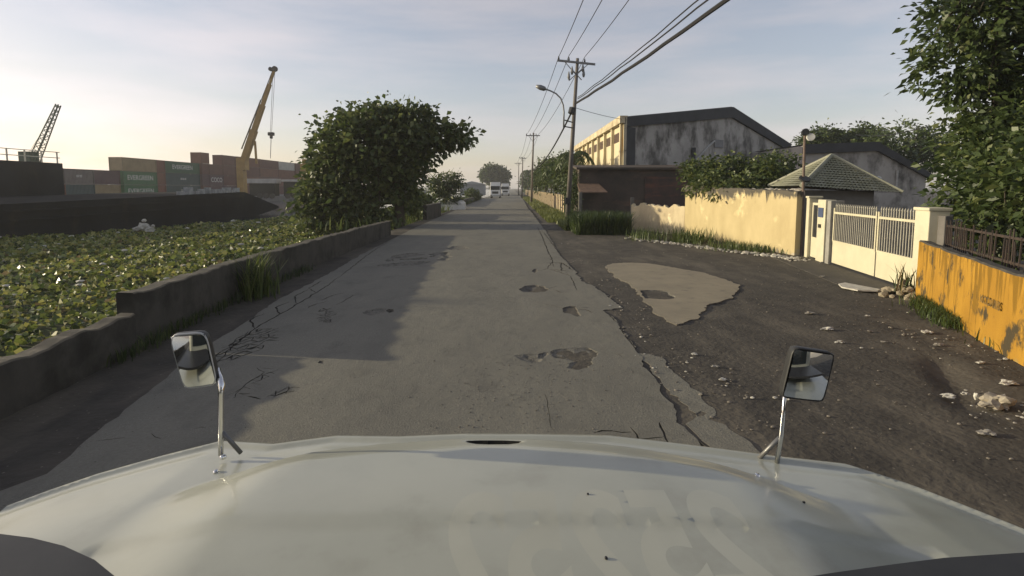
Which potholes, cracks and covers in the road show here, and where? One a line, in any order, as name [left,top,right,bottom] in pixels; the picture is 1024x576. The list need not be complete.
pothole [377,252,453,267]
crack [215,242,388,363]
pothole [514,347,598,369]
crack [235,369,298,397]
crack [538,228,635,354]
pothole [363,308,387,316]
